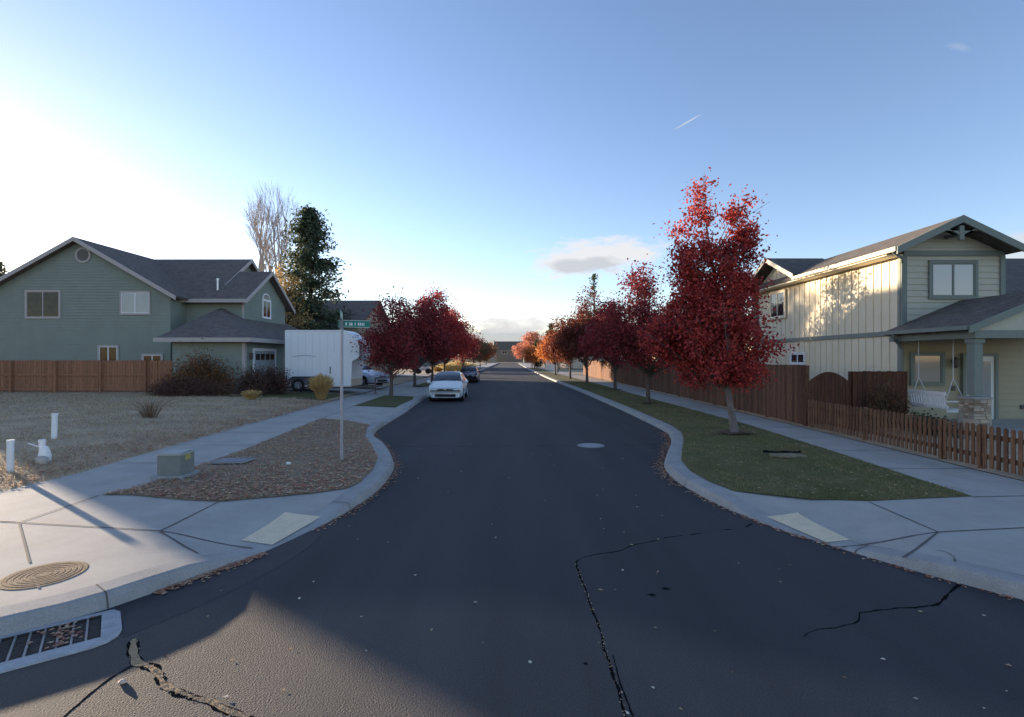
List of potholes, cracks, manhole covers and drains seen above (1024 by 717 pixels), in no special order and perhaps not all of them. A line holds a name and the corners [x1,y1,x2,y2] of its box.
crack [63,638,253,717]
drain grate [0,609,122,674]
manhole cover [0,561,89,591]
crack [575,523,753,717]
